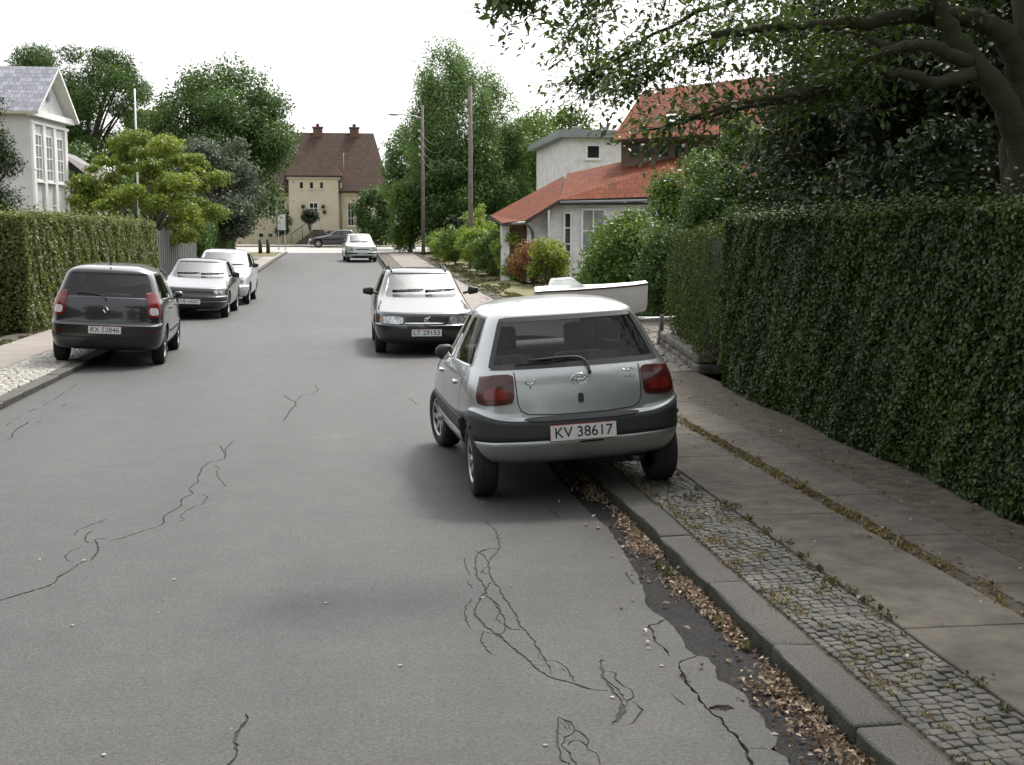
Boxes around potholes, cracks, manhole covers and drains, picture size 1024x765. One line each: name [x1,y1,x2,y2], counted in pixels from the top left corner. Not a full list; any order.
crack [463,522,771,765]
crack [0,442,233,601]
crack [6,383,78,440]
crack [211,714,249,765]
